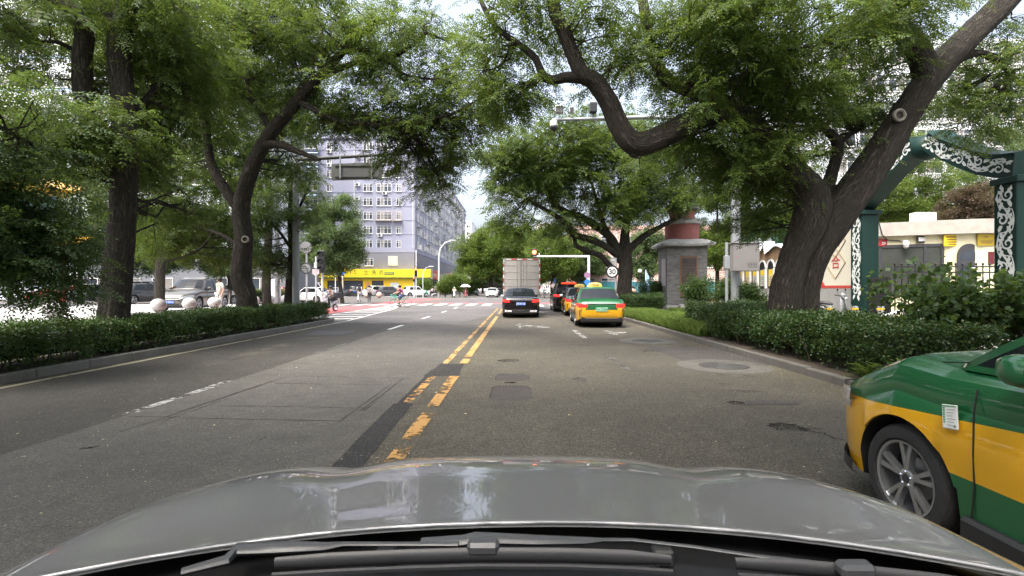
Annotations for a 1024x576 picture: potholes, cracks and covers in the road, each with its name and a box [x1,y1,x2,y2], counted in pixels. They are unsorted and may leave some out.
pothole [766,423,808,432]
manhole cover [676,359,775,374]
